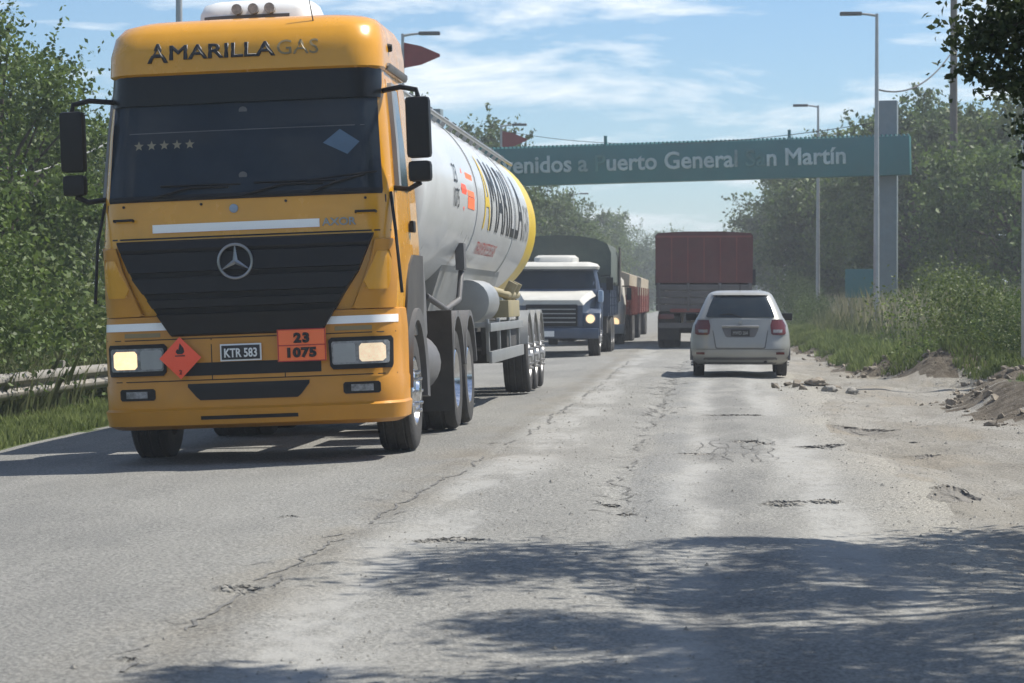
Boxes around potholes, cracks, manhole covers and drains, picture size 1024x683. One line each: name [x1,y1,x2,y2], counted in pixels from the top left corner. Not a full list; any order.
pothole [209,584,272,596]
crack [109,362,627,671]
crack [588,358,689,516]
pothole [757,500,814,508]
pothole [826,424,905,437]
pothole [407,537,492,545]
pothole [926,484,986,506]
